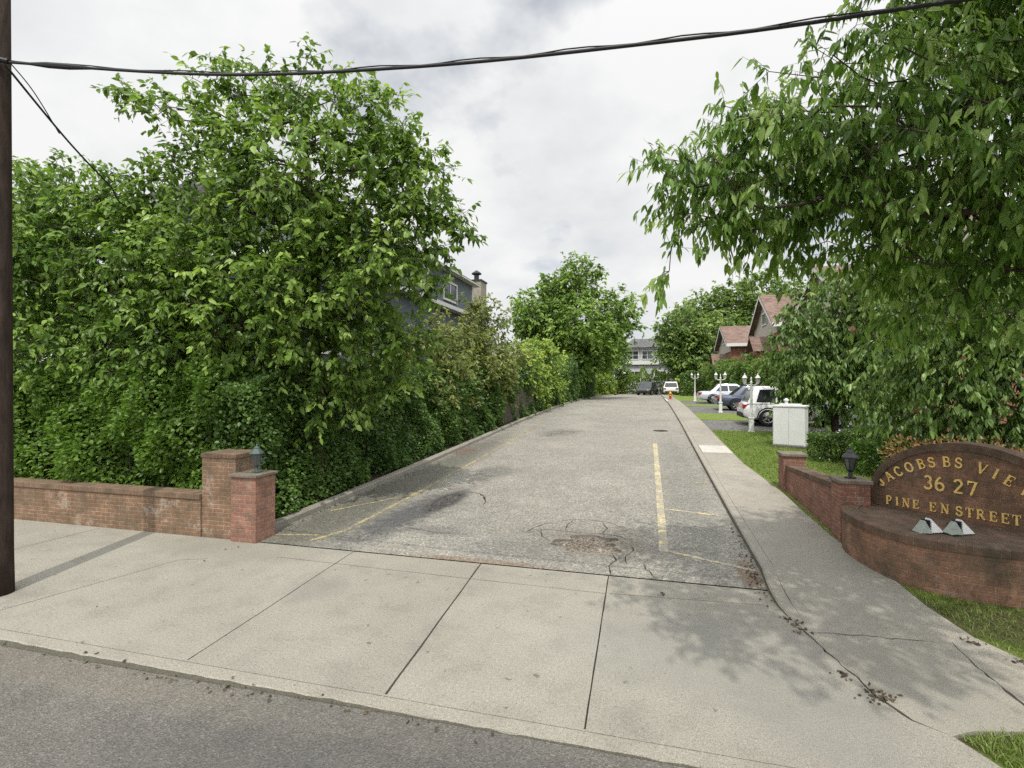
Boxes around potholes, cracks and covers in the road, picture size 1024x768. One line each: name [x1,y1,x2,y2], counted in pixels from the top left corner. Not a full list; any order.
crack [802,629,948,735]
pothole [550,534,622,553]
crack [527,519,658,581]
crack [953,643,1024,706]
